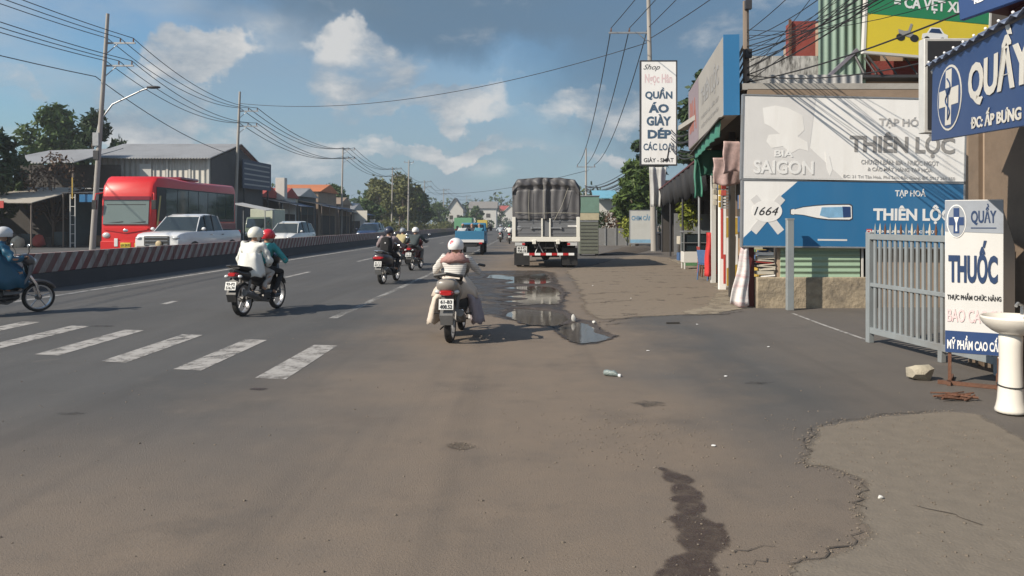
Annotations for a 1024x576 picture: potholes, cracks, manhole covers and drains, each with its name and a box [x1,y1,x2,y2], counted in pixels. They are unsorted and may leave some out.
crack [787,530,864,576]
